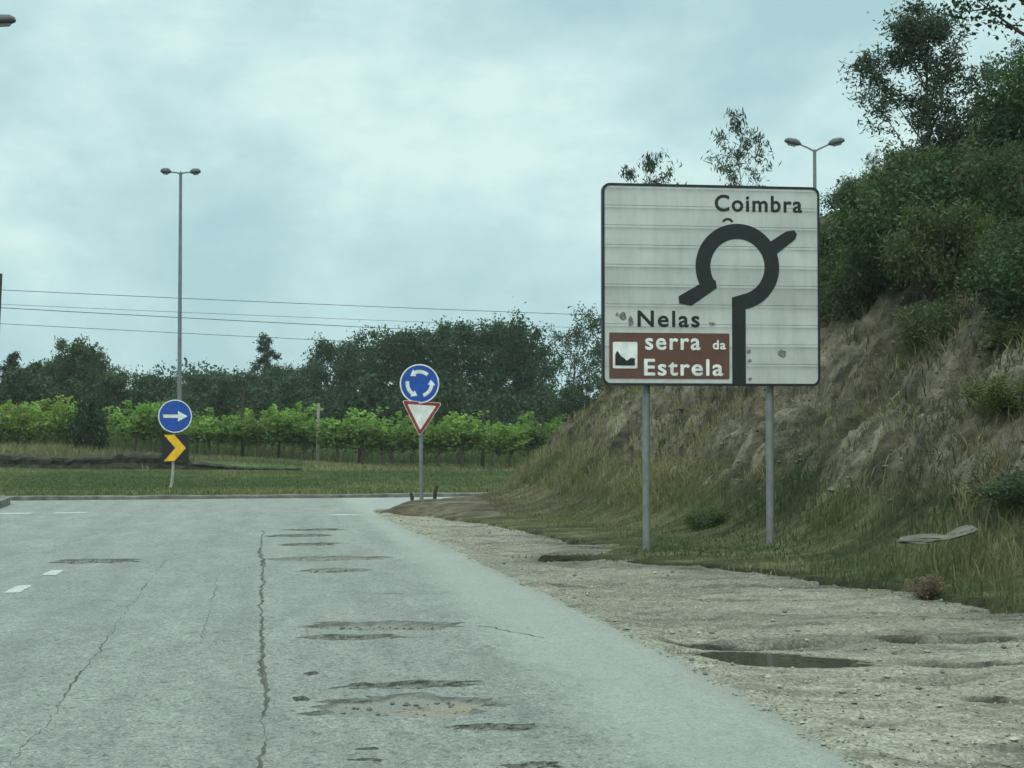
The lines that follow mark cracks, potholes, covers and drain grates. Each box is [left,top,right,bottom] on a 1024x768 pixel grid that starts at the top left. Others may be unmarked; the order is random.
pothole [444,723,539,732]
crack [475,625,545,639]
pothole [296,692,512,720]
crack [255,531,271,768]
pothole [328,679,482,690]
pothole [299,620,465,631]
pothole [677,650,876,668]
